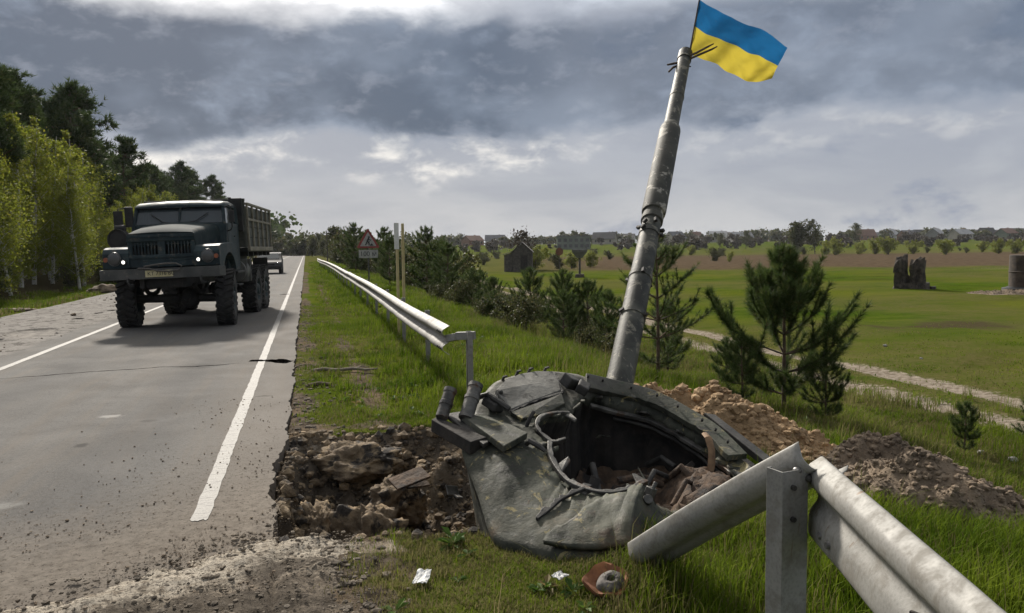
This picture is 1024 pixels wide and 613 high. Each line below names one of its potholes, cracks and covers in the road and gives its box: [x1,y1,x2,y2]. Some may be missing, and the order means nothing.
crack [3,359,292,379]
